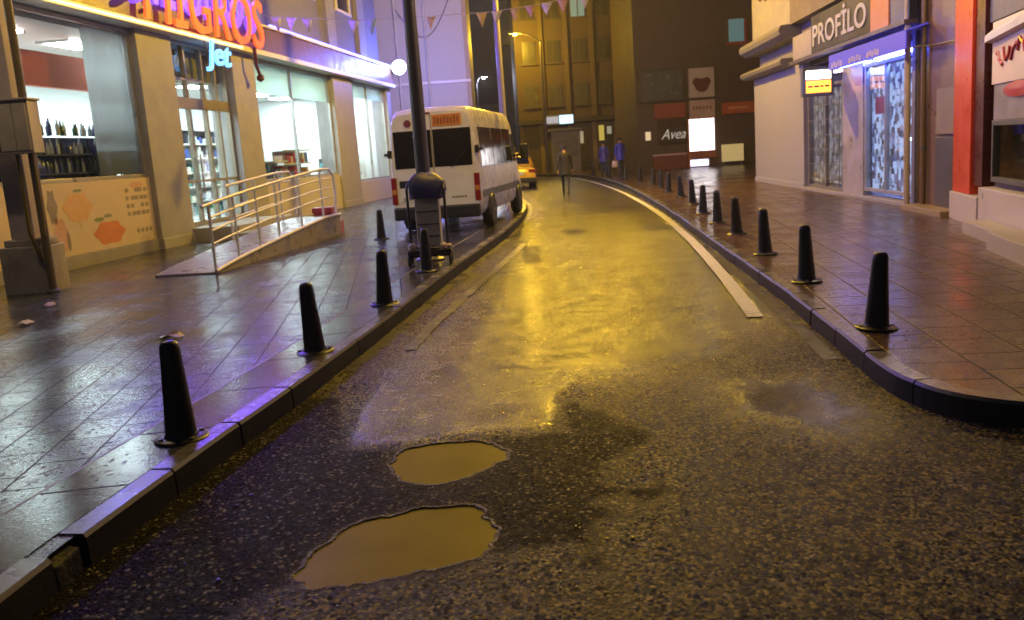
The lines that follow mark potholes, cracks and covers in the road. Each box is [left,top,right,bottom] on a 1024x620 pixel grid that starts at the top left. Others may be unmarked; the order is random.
pothole [386,439,512,485]
pothole [288,503,502,591]
